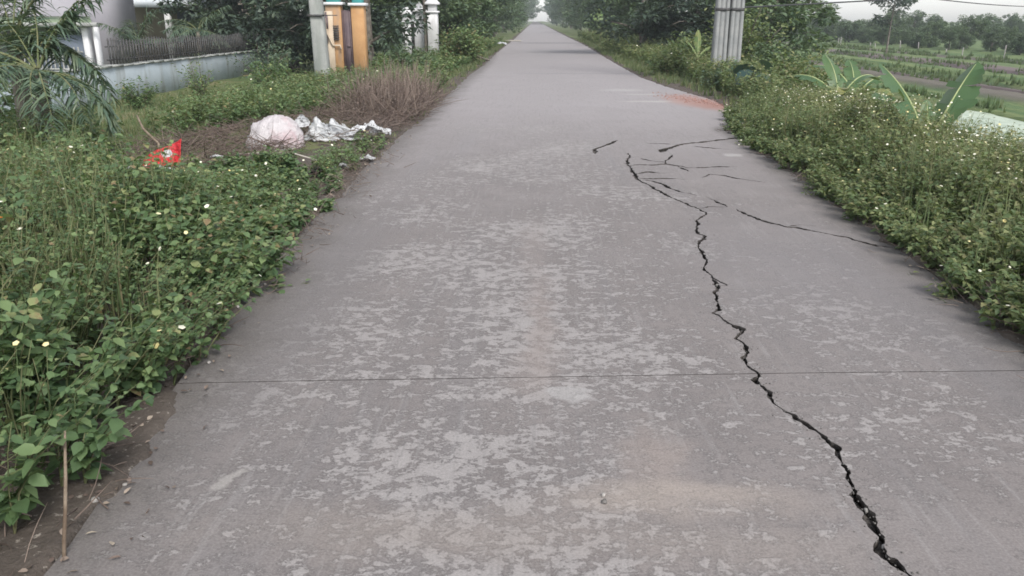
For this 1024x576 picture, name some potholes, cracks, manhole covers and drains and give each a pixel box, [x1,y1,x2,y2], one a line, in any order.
crack [592,138,911,576]
